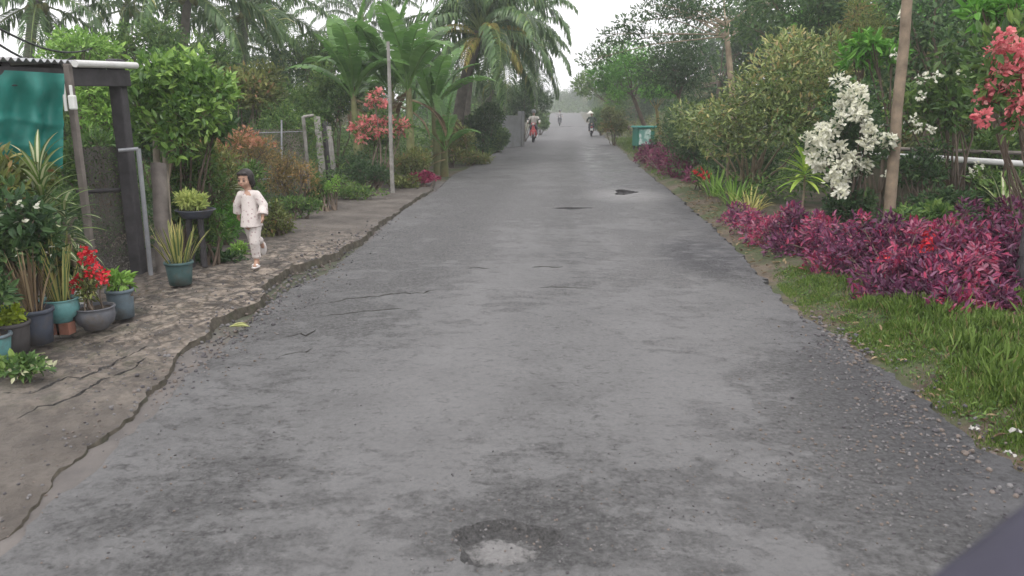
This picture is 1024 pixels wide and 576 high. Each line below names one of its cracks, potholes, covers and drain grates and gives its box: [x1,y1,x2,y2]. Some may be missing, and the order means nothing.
crack [2,345,151,418]
pothole [451,518,564,568]
crack [282,290,430,356]
